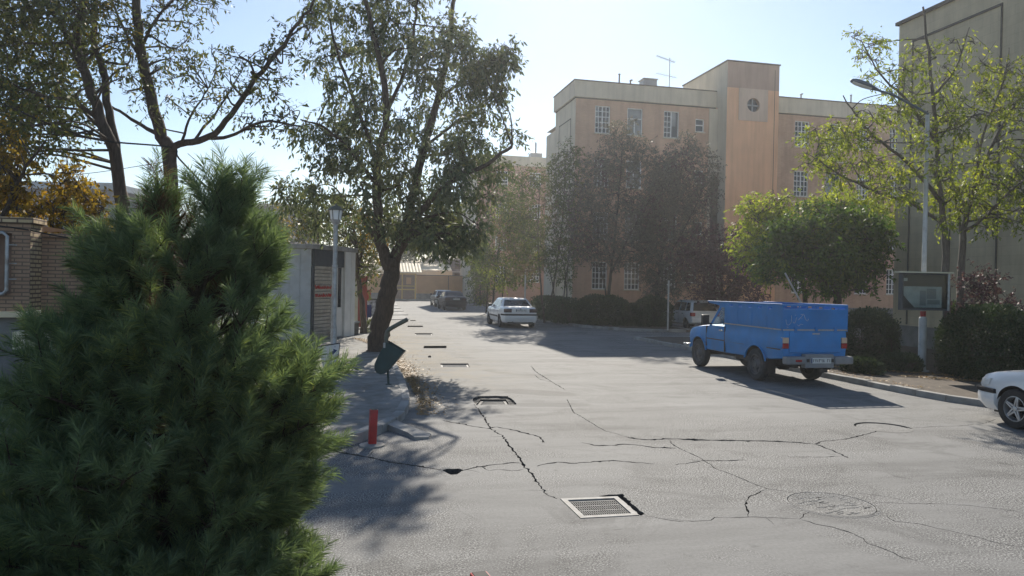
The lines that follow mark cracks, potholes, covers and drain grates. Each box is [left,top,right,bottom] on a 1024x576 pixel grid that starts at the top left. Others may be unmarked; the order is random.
crack [861,493,1024,548]
manhole cover [783,491,881,518]
drain grate [560,496,639,519]
crack [334,400,920,562]
